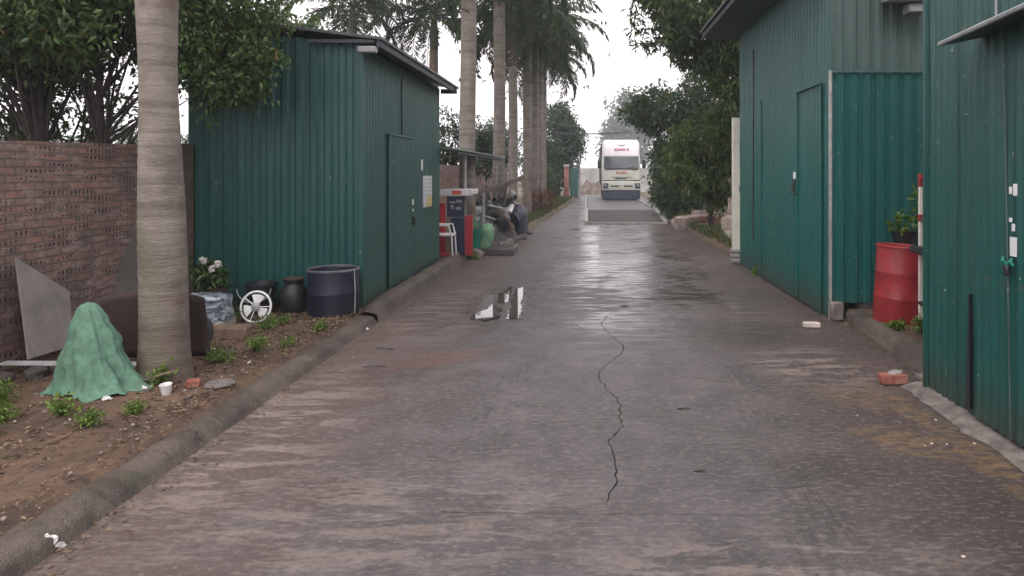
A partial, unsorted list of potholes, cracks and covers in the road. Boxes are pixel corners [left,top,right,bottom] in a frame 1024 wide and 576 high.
crack [462,310,756,516]
